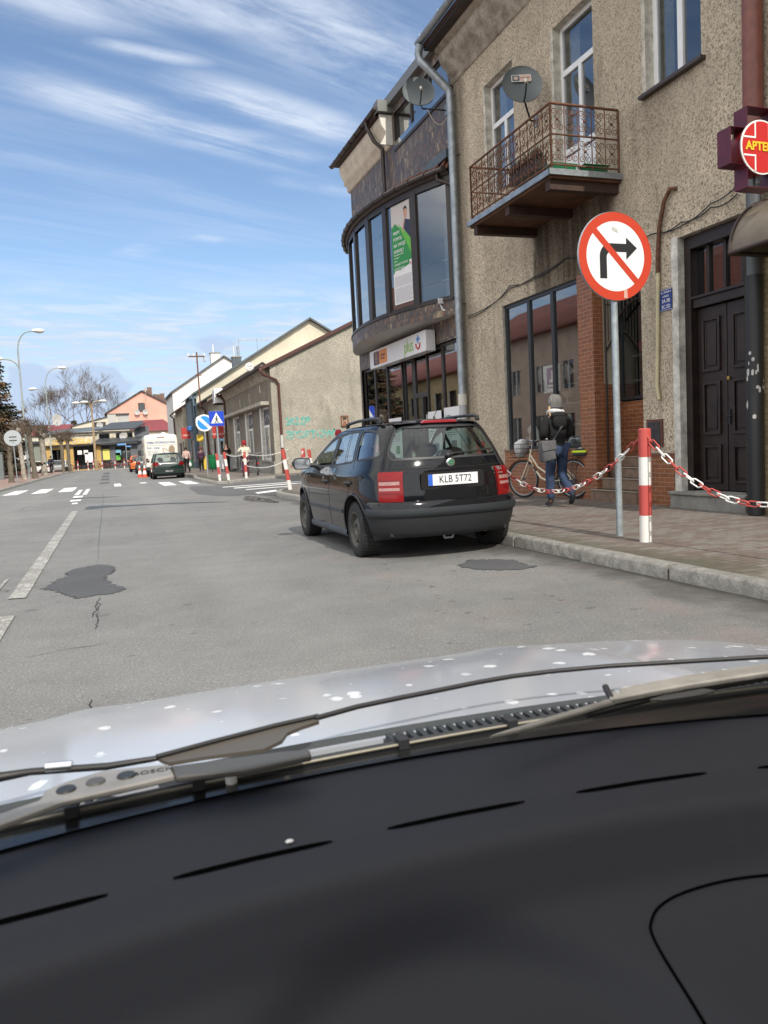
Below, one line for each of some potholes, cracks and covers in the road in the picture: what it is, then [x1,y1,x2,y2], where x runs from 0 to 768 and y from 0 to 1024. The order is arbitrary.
crack [40,598,102,655]
